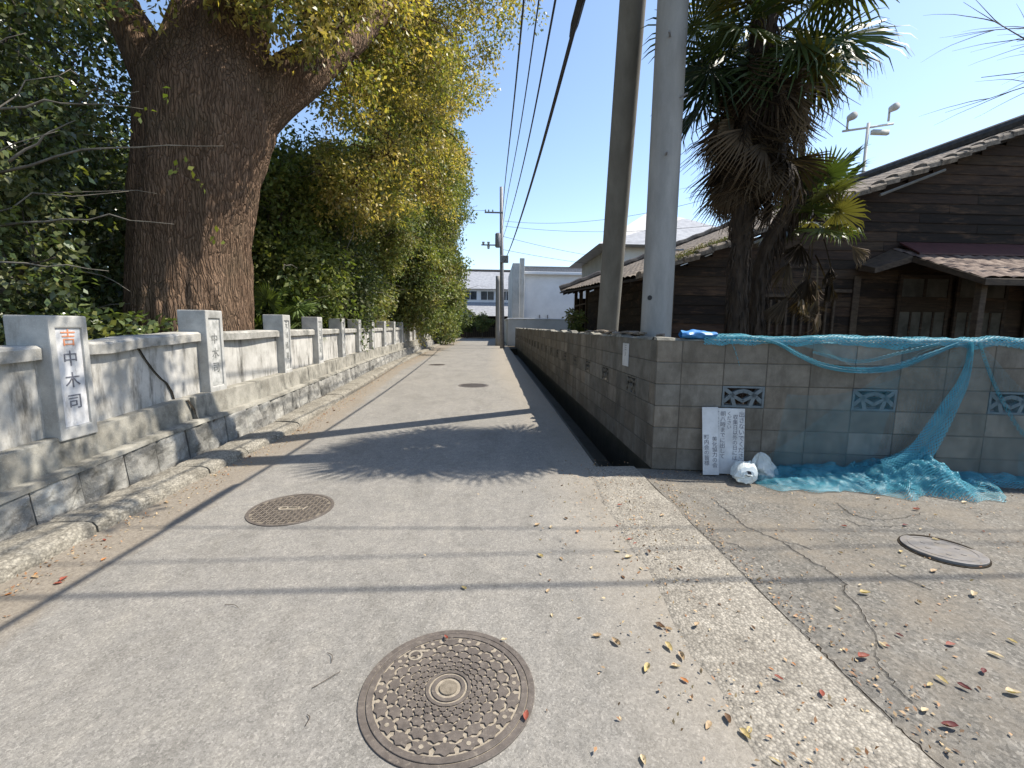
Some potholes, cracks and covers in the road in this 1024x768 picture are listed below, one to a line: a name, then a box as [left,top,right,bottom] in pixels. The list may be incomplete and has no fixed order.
manhole cover [897,534,992,569]
manhole cover [357,630,535,768]
crack [694,498,945,768]
manhole cover [245,494,334,527]
